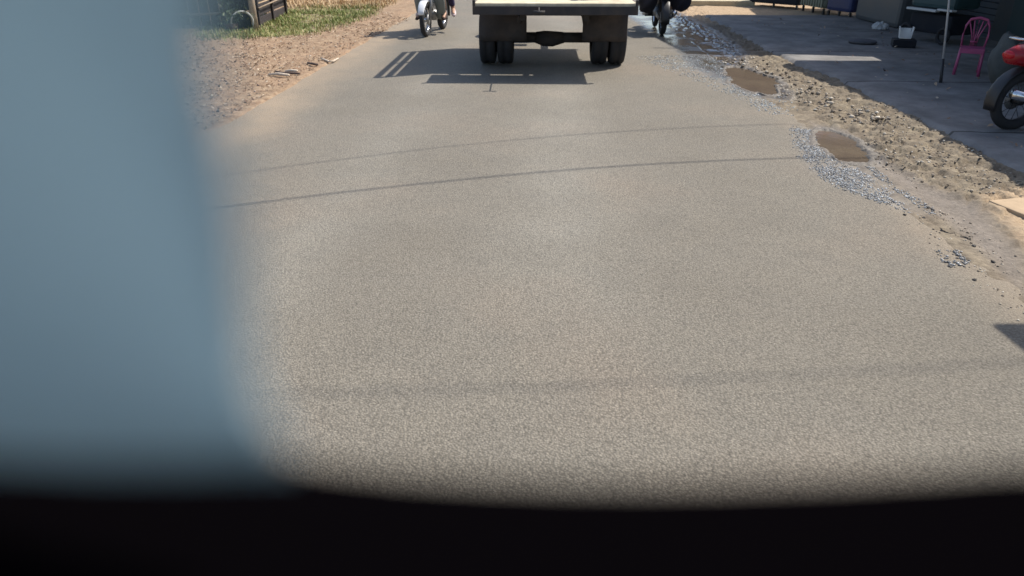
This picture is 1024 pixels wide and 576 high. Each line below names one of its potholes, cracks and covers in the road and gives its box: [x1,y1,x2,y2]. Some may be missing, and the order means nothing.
pothole [720,65,789,97]
pothole [808,127,880,166]
